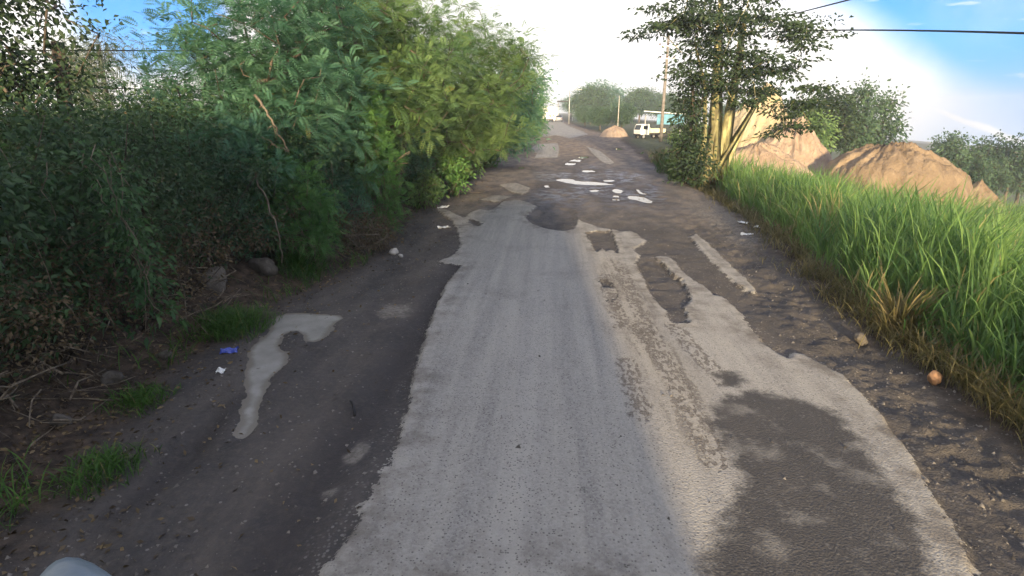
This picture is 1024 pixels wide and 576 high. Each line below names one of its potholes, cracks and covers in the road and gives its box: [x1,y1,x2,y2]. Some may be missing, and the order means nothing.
pothole [520,206,585,233]
pothole [629,256,701,326]
pothole [579,228,627,257]
